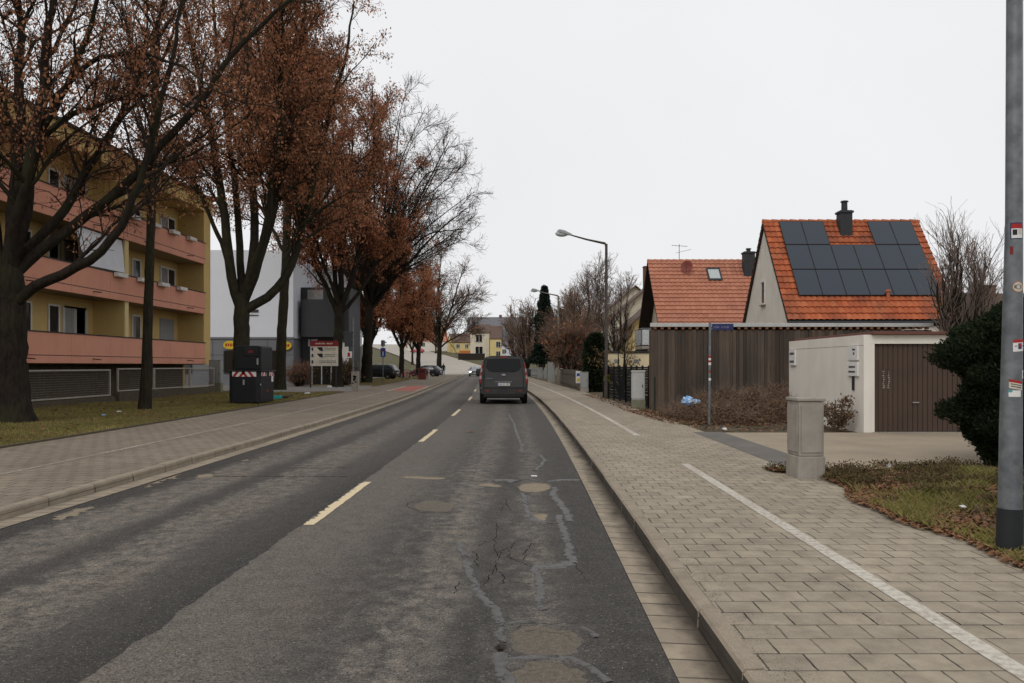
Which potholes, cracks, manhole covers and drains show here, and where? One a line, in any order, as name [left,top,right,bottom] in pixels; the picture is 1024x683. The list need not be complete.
crack [466,479,559,588]
